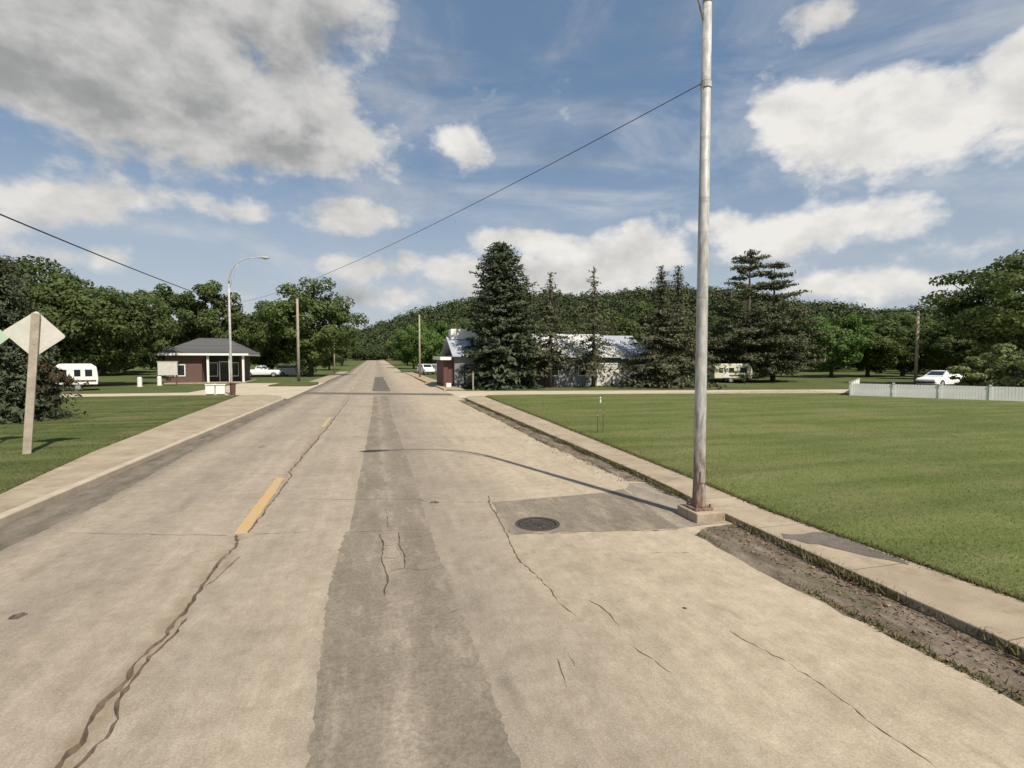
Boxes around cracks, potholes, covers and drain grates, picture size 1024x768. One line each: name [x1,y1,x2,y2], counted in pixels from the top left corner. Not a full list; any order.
crack [487,495,671,673]
crack [54,398,350,768]
crack [379,509,459,616]
crack [730,631,934,766]
manhole cover [515,517,560,531]
